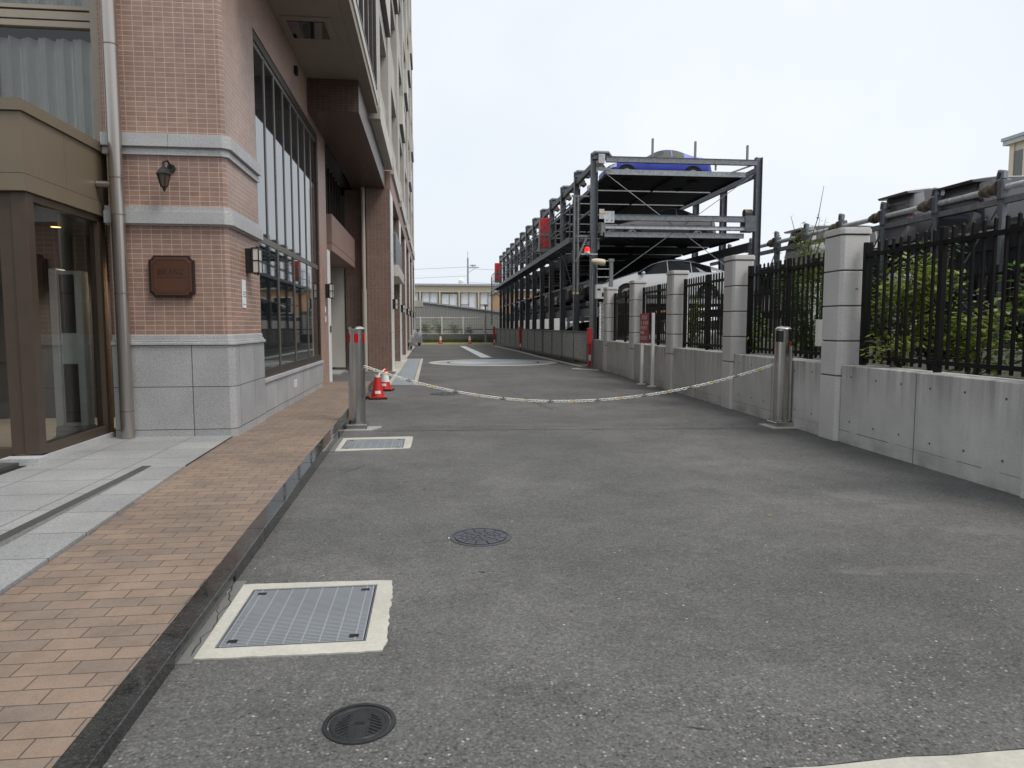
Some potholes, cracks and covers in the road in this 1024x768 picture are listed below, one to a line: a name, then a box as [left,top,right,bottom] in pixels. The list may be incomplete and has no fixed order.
drain grate [335,436,413,452]
drain grate [193,580,393,660]
manhole cover [322,703,396,745]
manhole cover [448,528,512,547]
